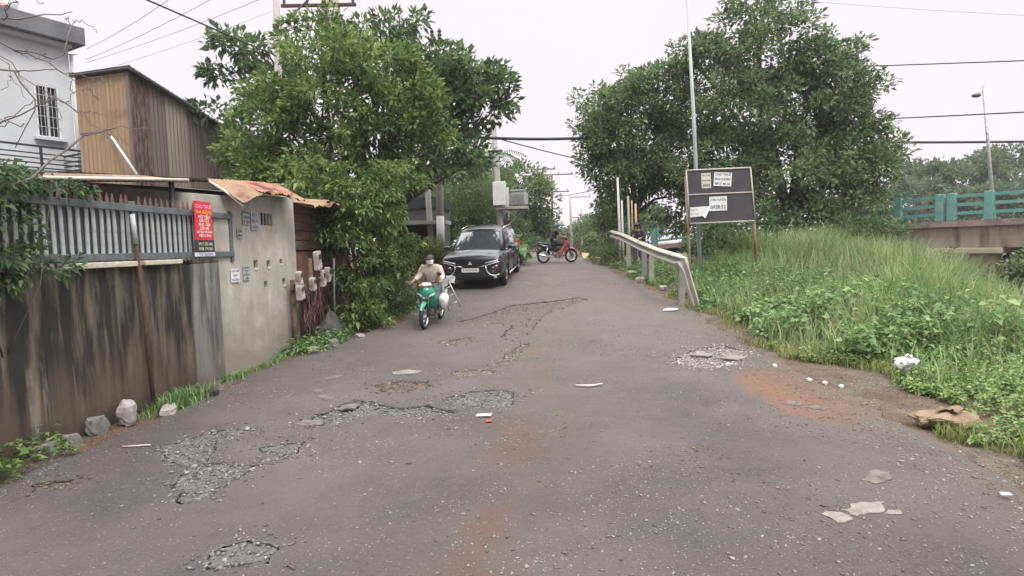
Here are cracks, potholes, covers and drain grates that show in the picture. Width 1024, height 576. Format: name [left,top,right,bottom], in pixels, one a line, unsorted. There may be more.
pothole [134,422,297,524]
pothole [9,466,101,502]
pothole [662,343,770,372]
pothole [364,377,442,396]
pothole [452,296,589,344]
pothole [427,335,486,347]
pothole [182,524,321,576]
pothole [430,384,534,413]
pothole [435,364,513,379]
pothole [287,395,473,434]
pothole [486,341,537,366]
